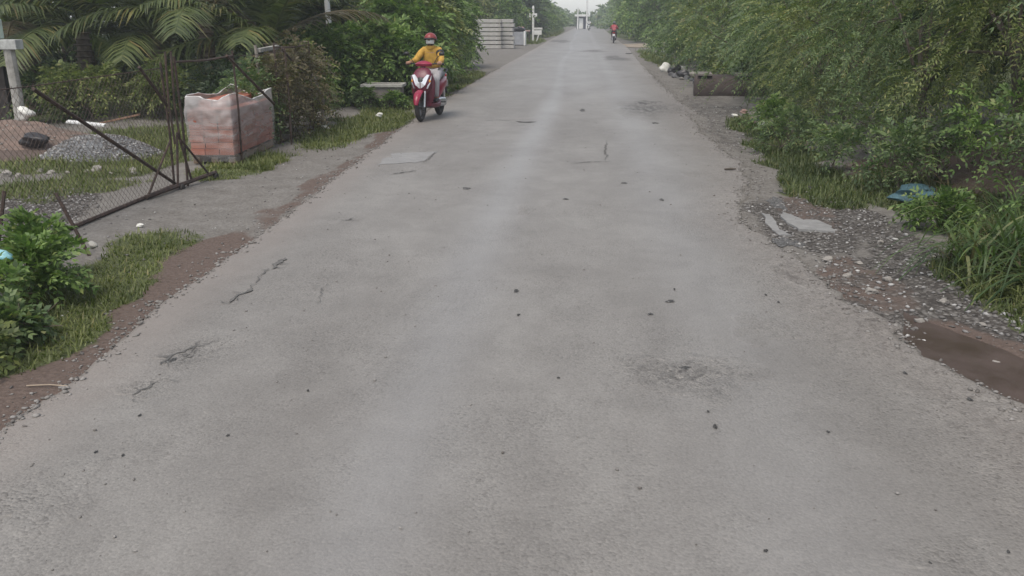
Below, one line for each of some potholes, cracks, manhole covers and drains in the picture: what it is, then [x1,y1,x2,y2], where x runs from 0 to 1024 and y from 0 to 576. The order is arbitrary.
crack [220,258,287,303]
crack [132,341,209,403]
pothole [596,354,776,407]
